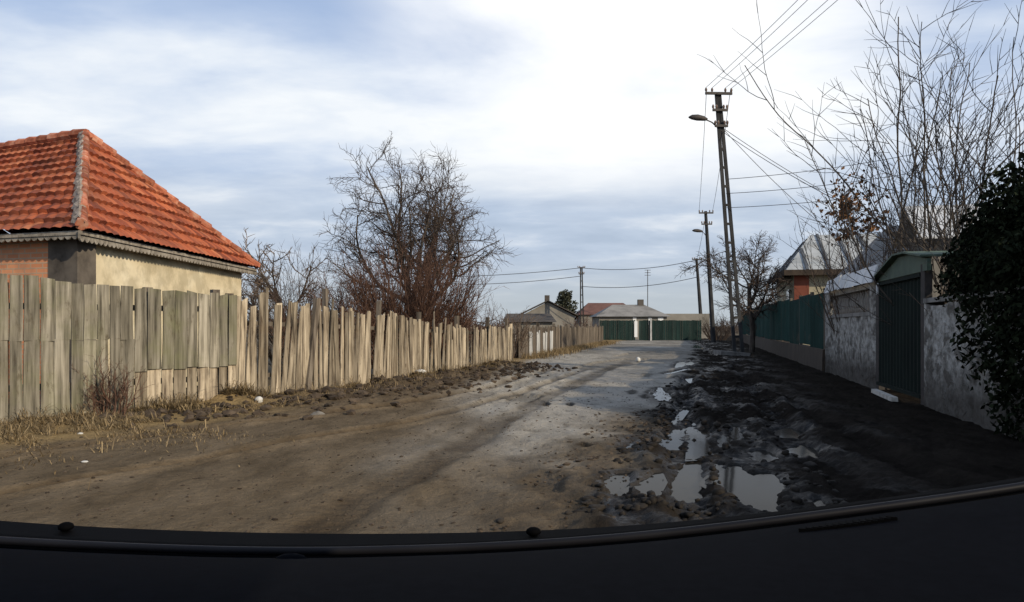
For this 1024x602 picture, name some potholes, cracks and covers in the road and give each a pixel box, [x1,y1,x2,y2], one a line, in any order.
pothole [595,468,644,497]
pothole [677,419,704,437]
pothole [665,407,694,425]
pothole [698,459,798,512]
pothole [621,469,673,500]
pothole [678,422,726,461]
pothole [651,386,676,401]
pothole [667,456,721,504]
pothole [648,425,690,451]
pothole [778,437,832,458]
